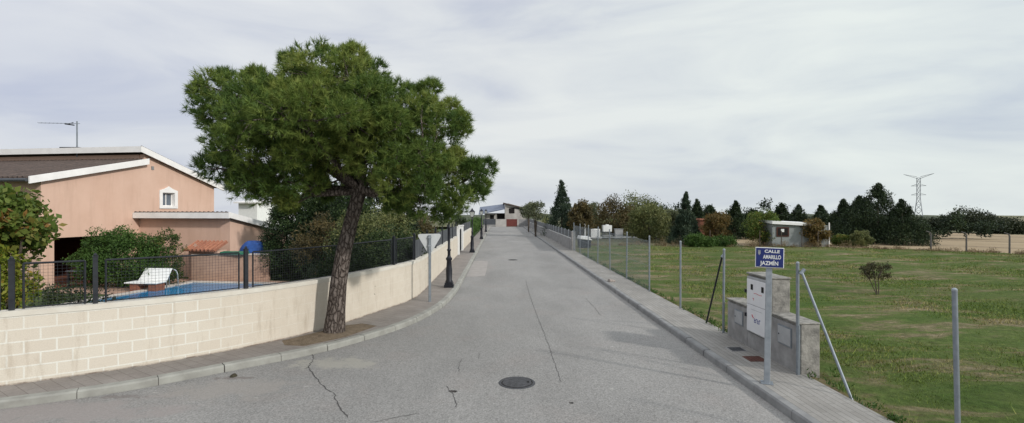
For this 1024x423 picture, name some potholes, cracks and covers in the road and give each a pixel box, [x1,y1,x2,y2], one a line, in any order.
crack [307,354,348,417]
manhole cover [499,376,535,389]
